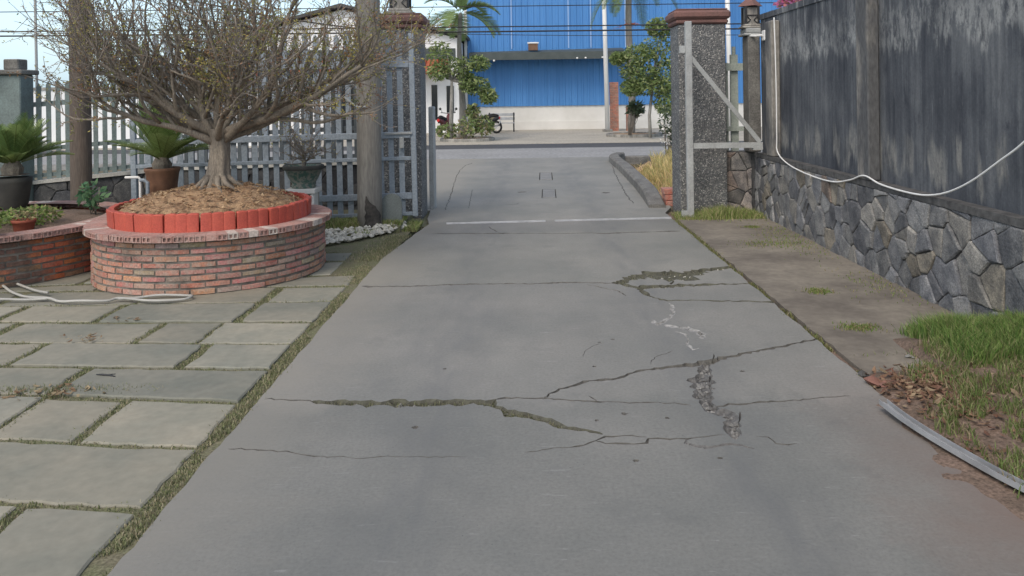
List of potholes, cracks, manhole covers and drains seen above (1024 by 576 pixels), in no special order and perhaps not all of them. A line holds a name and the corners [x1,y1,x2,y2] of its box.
crack [231,448,455,459]
pothole [686,365,742,439]
crack [312,266,817,452]
